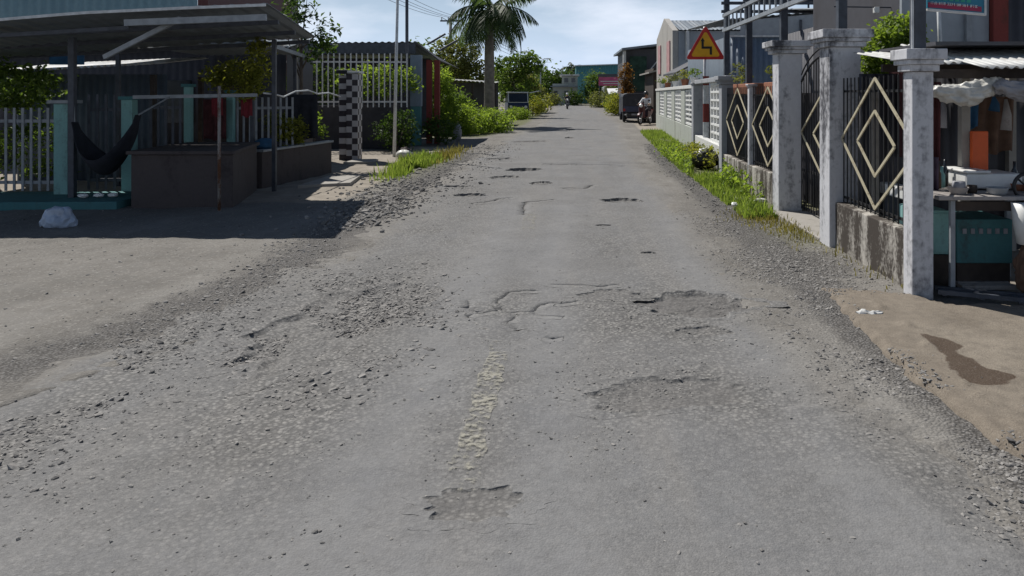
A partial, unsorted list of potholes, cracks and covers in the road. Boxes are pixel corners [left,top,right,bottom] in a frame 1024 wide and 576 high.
crack [459,283,620,342]
pothole [588,196,658,204]
crack [472,185,600,214]
pothole [556,372,776,420]
pothole [398,476,557,533]
pothole [612,287,789,323]
